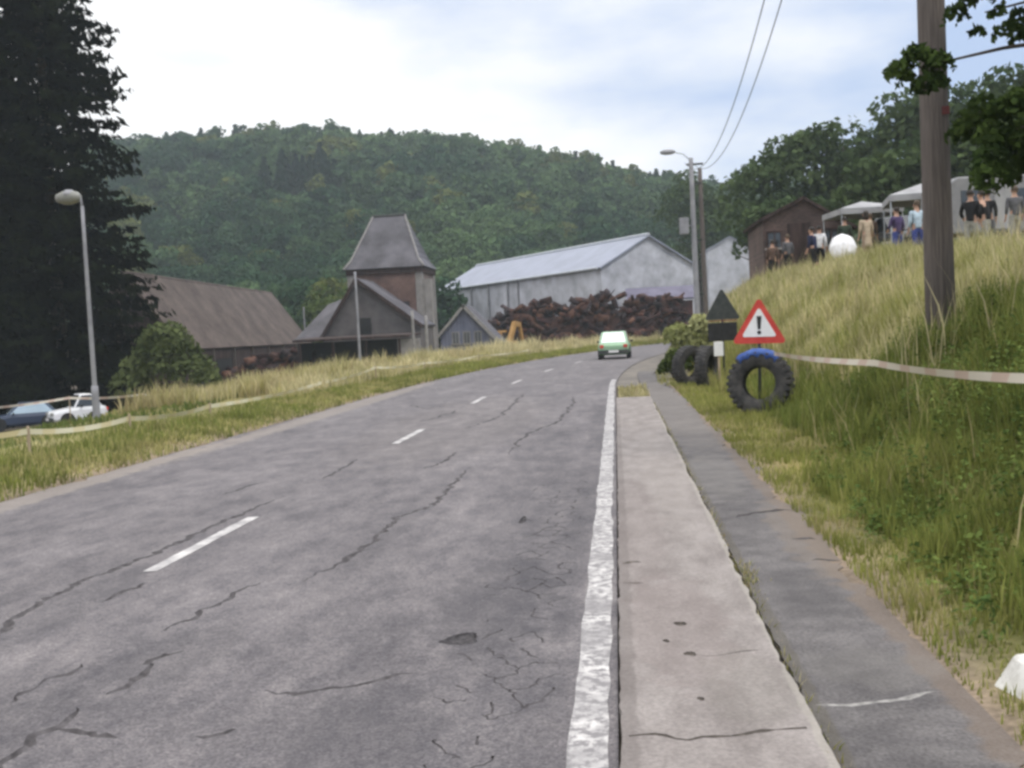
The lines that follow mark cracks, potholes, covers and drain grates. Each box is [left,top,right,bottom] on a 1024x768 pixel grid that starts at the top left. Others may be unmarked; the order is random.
crack [163,583,260,631]
crack [629,727,806,741]
crack [736,509,787,517]
crack [423,480,588,768]
pothole [438,632,478,645]
crack [411,394,576,455]
crack [266,673,413,696]
crack [289,452,471,585]
crack [0,651,182,768]
